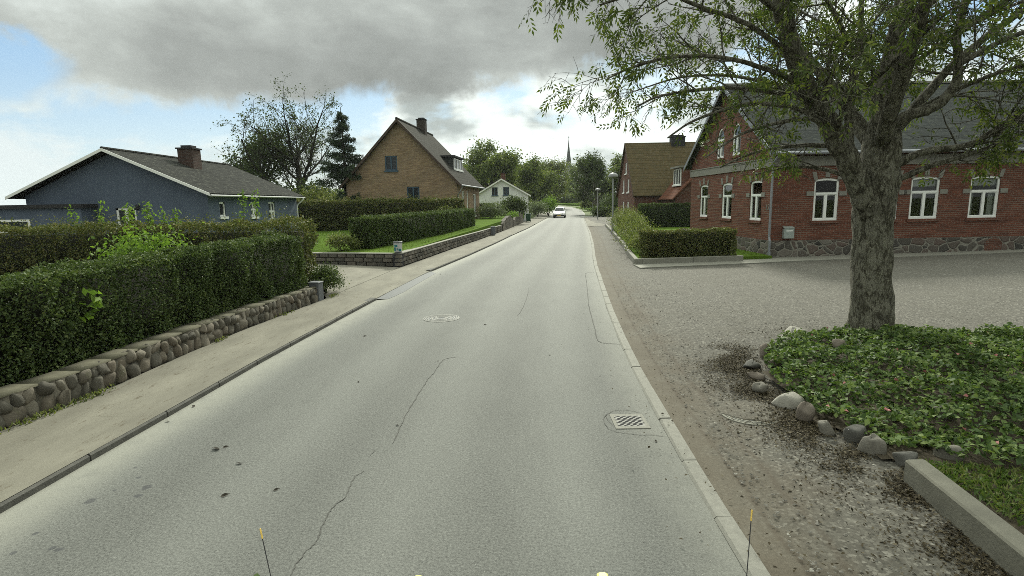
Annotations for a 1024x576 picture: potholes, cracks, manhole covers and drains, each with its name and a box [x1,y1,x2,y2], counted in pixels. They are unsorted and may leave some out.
drain grate [609,414,651,429]
crack [291,471,363,575]
crack [371,357,451,454]
manhole cover [423,314,460,322]
